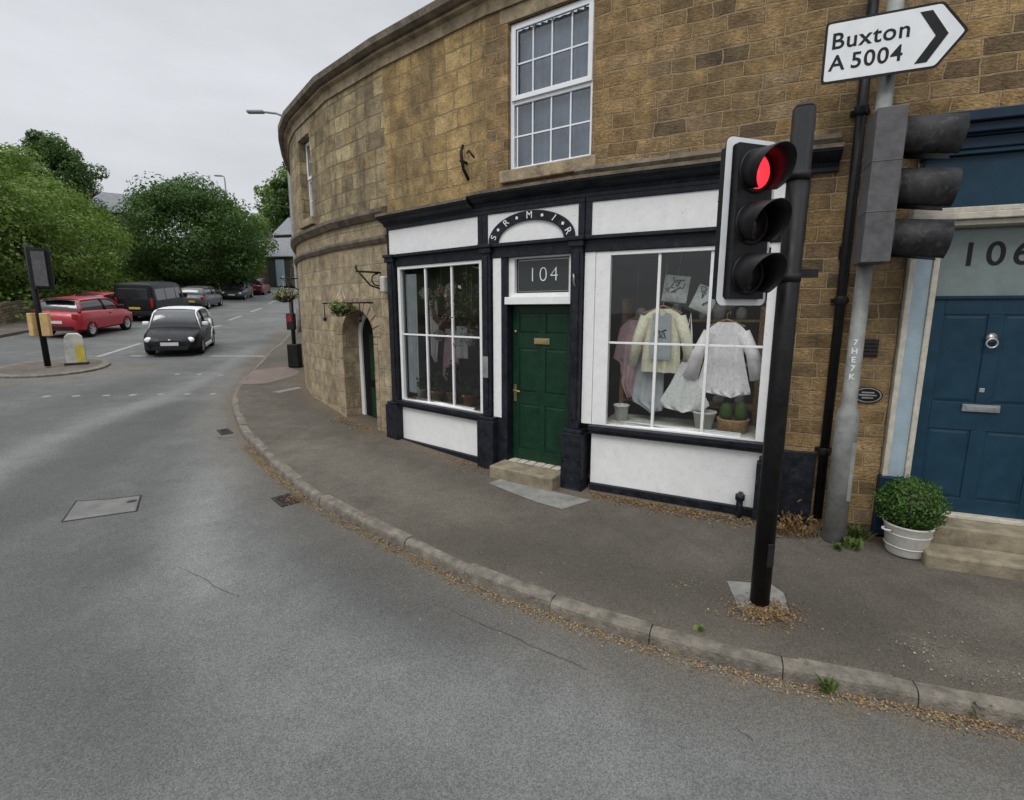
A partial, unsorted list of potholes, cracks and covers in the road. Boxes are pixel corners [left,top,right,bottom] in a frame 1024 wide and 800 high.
manhole cover [61,495,142,522]
